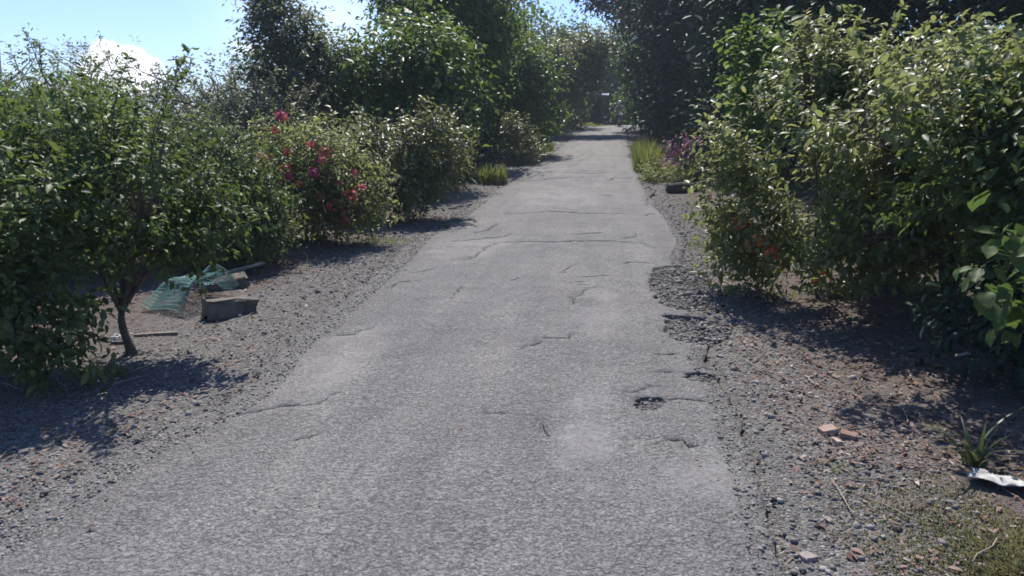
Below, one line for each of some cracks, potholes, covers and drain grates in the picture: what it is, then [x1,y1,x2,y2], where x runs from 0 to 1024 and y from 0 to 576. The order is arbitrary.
pothole [662,315,735,348]
pothole [633,397,666,411]
pothole [684,373,720,384]
